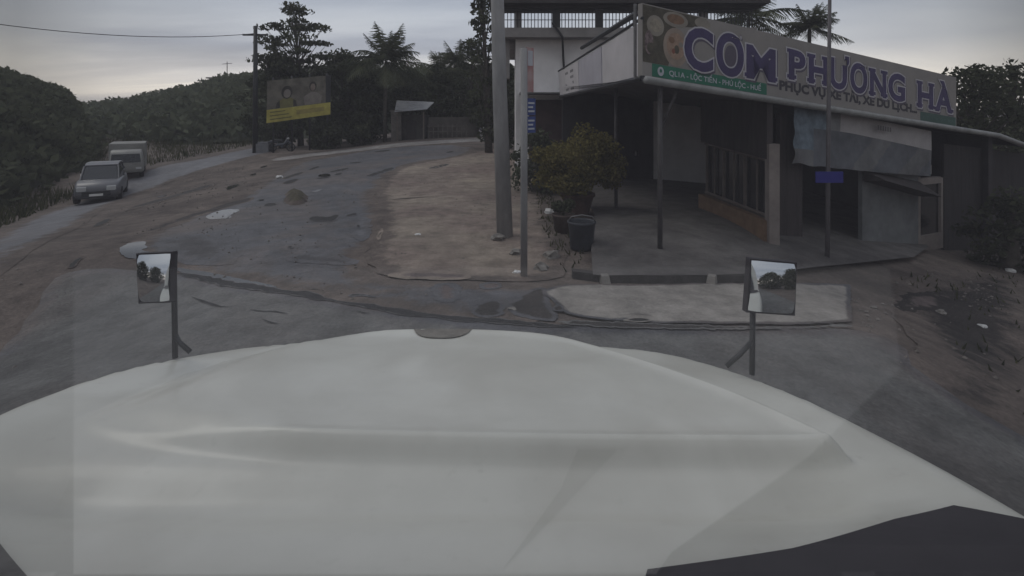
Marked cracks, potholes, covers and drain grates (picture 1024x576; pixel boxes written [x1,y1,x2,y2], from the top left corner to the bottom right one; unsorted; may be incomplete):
pothole [308,214,340,222]
pothole [471,300,505,318]
crack [193,297,227,307]
